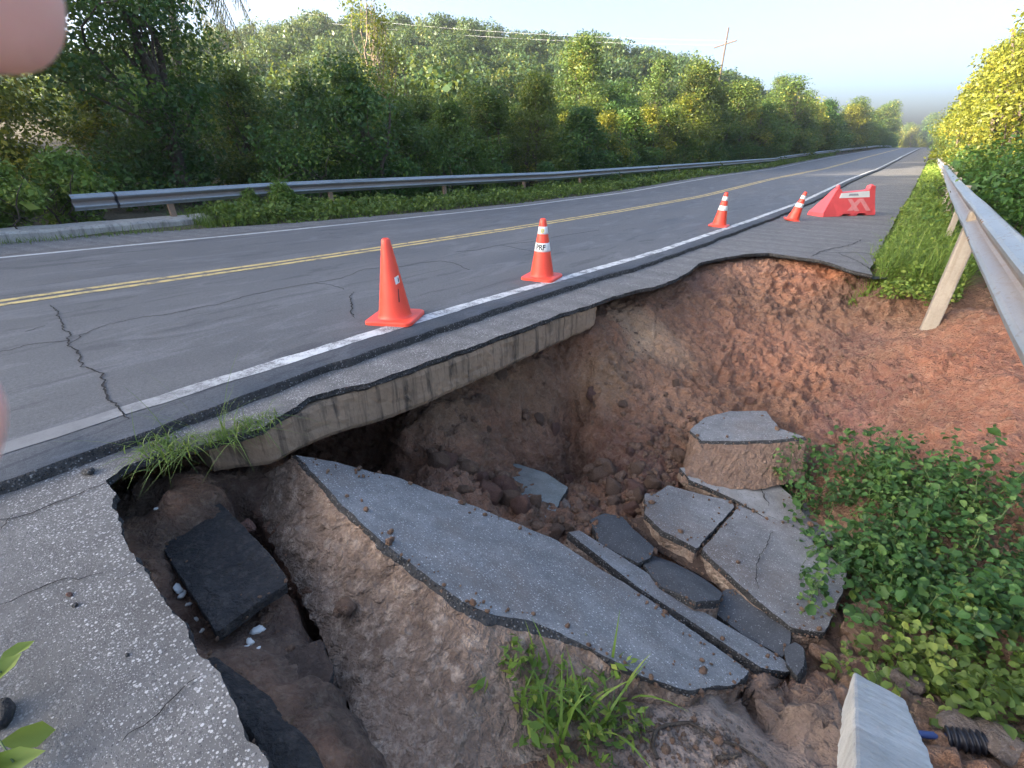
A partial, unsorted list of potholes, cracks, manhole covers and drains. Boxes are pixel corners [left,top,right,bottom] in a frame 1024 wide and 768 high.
crack [122,678,196,741]
crack [0,230,597,418]
crack [811,240,870,269]
crack [755,489,775,588]
crack [0,482,107,530]
